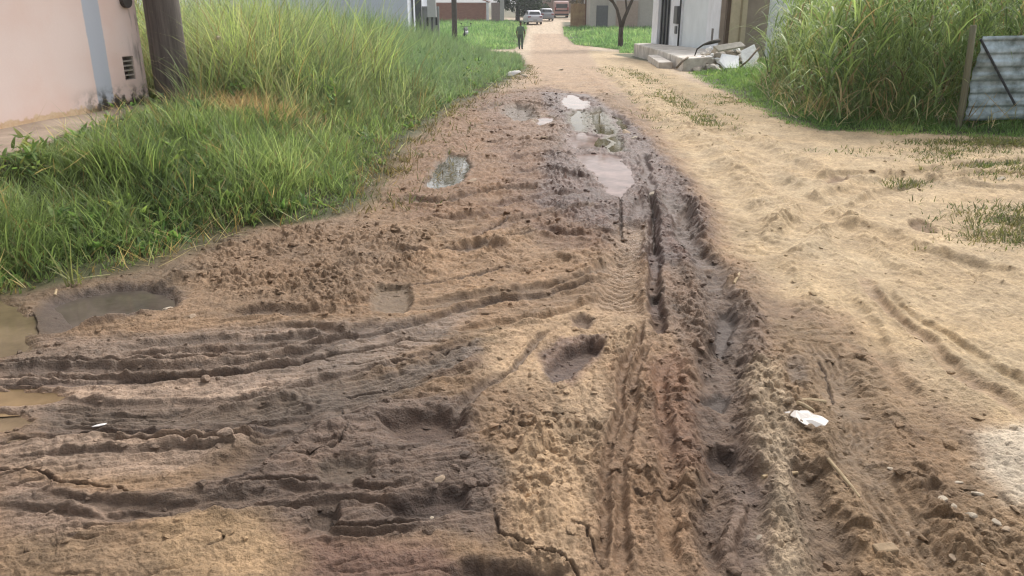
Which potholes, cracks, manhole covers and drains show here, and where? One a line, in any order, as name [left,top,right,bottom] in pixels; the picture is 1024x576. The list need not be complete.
pothole [576,152,635,199]
pothole [33,284,182,335]
crack [490,506,601,576]
pothole [560,94,595,111]
pothole [425,153,471,189]
crack [0,464,175,517]
pothole [501,104,538,121]
